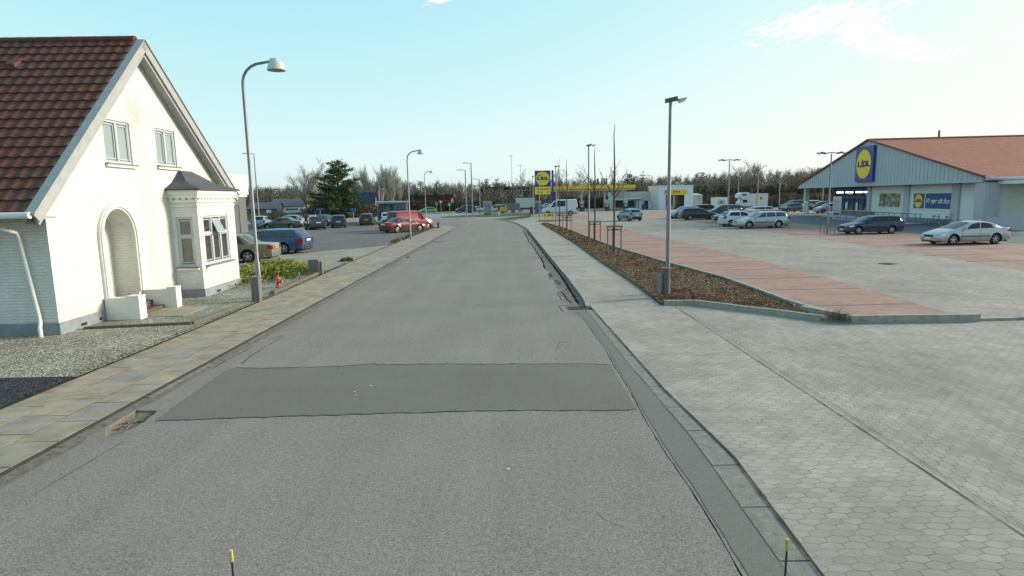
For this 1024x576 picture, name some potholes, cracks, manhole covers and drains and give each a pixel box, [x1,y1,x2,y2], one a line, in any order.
pothole [106,410,157,437]
